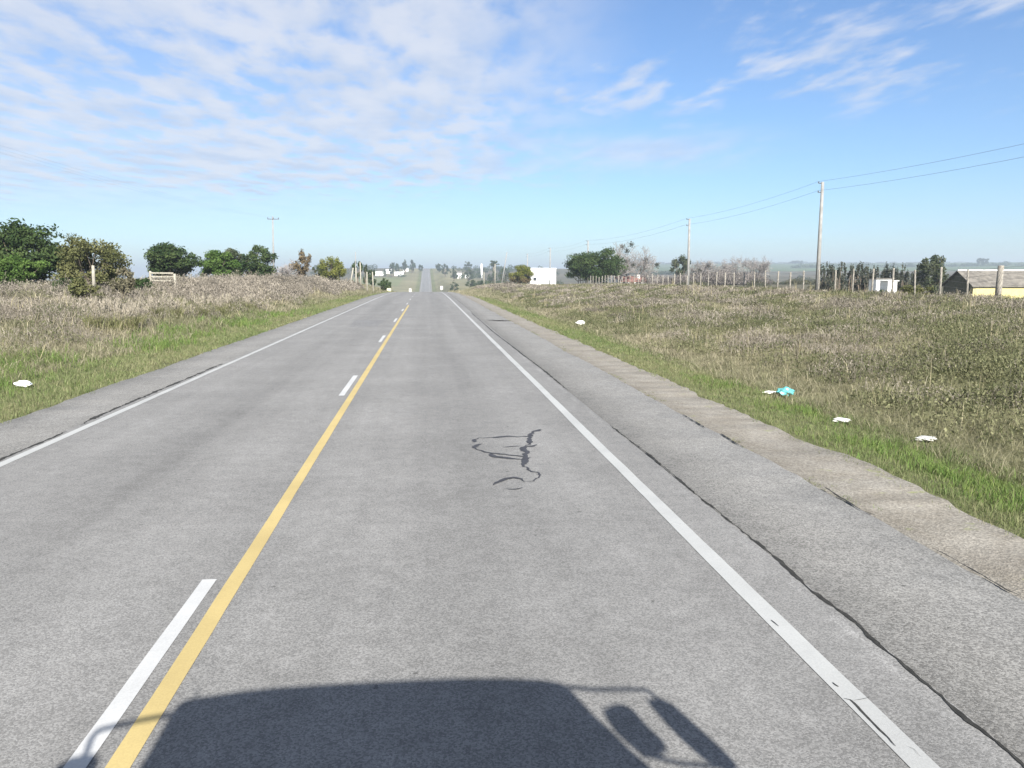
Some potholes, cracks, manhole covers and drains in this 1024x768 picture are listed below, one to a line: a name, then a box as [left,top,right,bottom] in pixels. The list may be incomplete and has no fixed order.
crack [825,487,875,515]
crack [833,683,896,746]
crack [937,550,1014,593]
